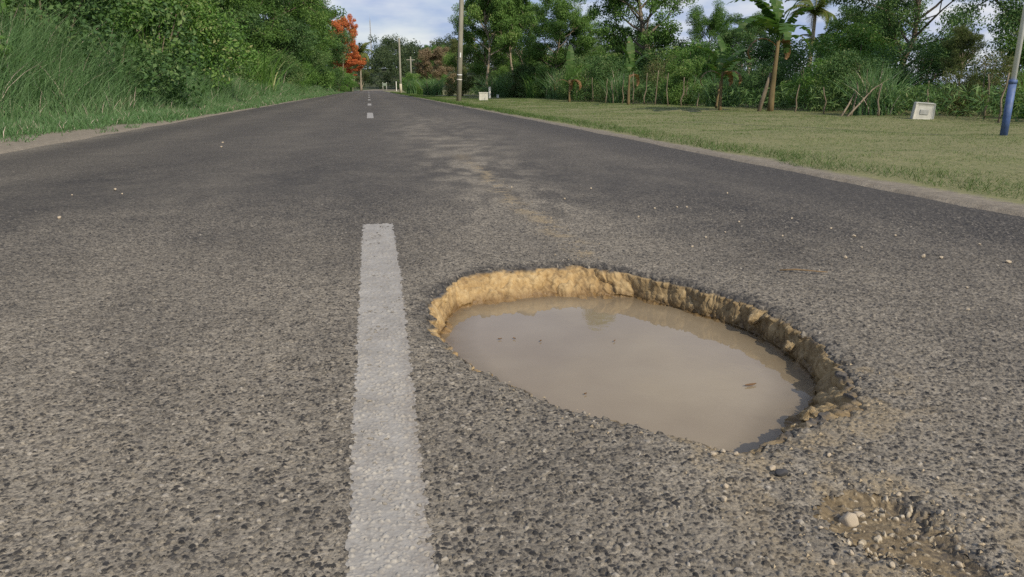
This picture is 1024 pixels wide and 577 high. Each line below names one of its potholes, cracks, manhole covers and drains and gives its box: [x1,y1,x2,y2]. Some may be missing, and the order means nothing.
pothole [809,488,997,577]
pothole [427,265,864,455]
